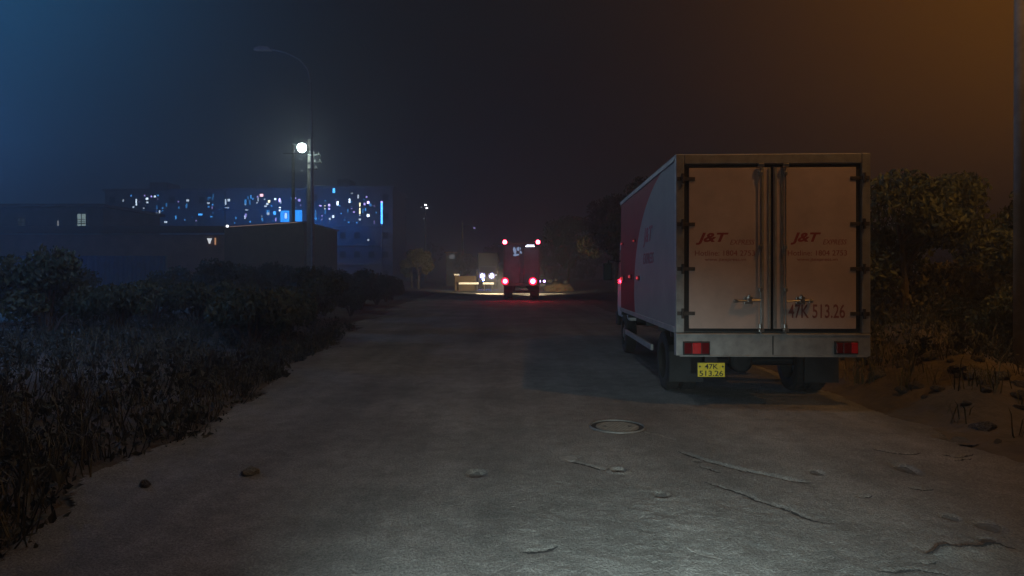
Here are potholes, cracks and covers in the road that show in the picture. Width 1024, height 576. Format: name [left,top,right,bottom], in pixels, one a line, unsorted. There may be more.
crack [878,542,1015,576]
crack [646,432,829,524]
manhole cover [589,419,646,434]
